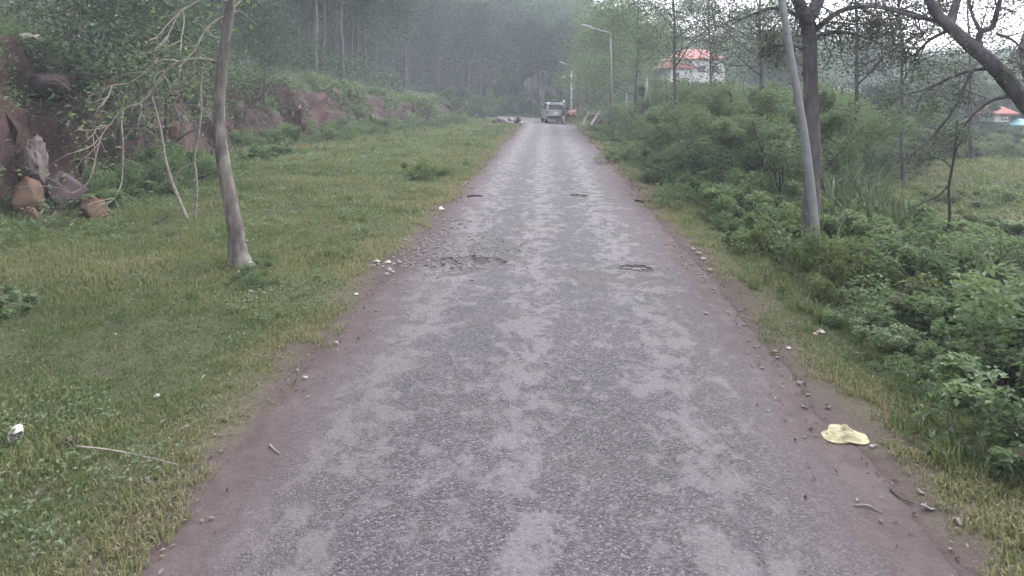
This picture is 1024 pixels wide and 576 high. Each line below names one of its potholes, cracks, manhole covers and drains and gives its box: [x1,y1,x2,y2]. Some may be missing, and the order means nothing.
pothole [419,255,515,274]
pothole [617,264,655,272]
